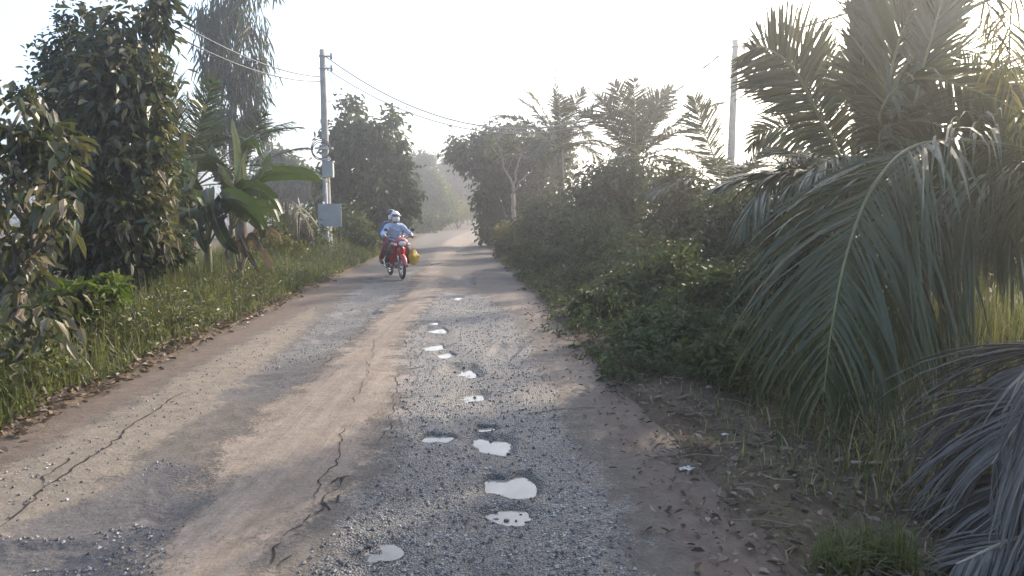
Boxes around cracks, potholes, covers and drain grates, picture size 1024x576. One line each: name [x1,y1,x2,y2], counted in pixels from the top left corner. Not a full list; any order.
crack [270,426,351,566]
pothole [436,361,488,379]
pothole [421,326,450,334]
pothole [437,389,494,404]
pothole [460,430,521,458]
pothole [328,536,422,566]
pothole [463,502,548,529]
pothole [413,430,461,443]
crack [377,373,400,445]
pothole [412,343,447,351]
pothole [473,424,503,433]
pothole [476,469,545,500]
